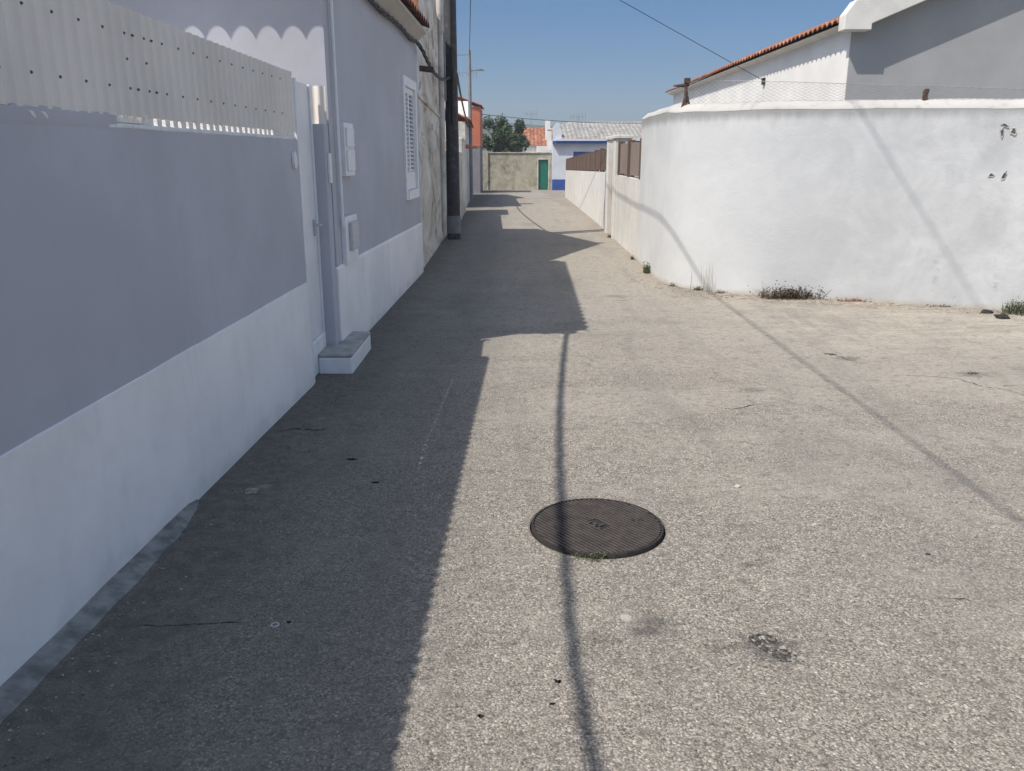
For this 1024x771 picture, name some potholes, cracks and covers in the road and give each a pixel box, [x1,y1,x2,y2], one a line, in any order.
crack [129,615,252,627]
pothole [748,634,797,663]
manhole cover [528,498,667,560]
crack [906,375,1022,395]
